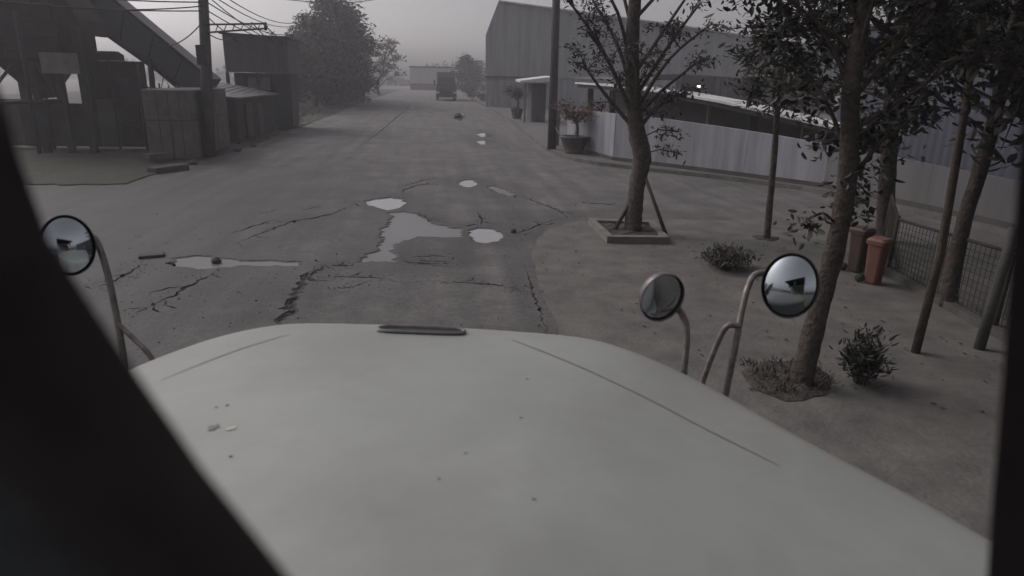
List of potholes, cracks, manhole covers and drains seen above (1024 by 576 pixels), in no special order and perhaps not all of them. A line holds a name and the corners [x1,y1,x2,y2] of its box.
pothole [363,197,408,210]
pothole [467,227,505,243]
crack [88,261,222,316]
pothole [169,255,304,269]
pothole [456,179,481,187]
pothole [486,185,517,197]
pothole [356,211,468,262]
crack [512,195,619,235]
crack [319,255,548,333]
crack [228,203,365,247]
